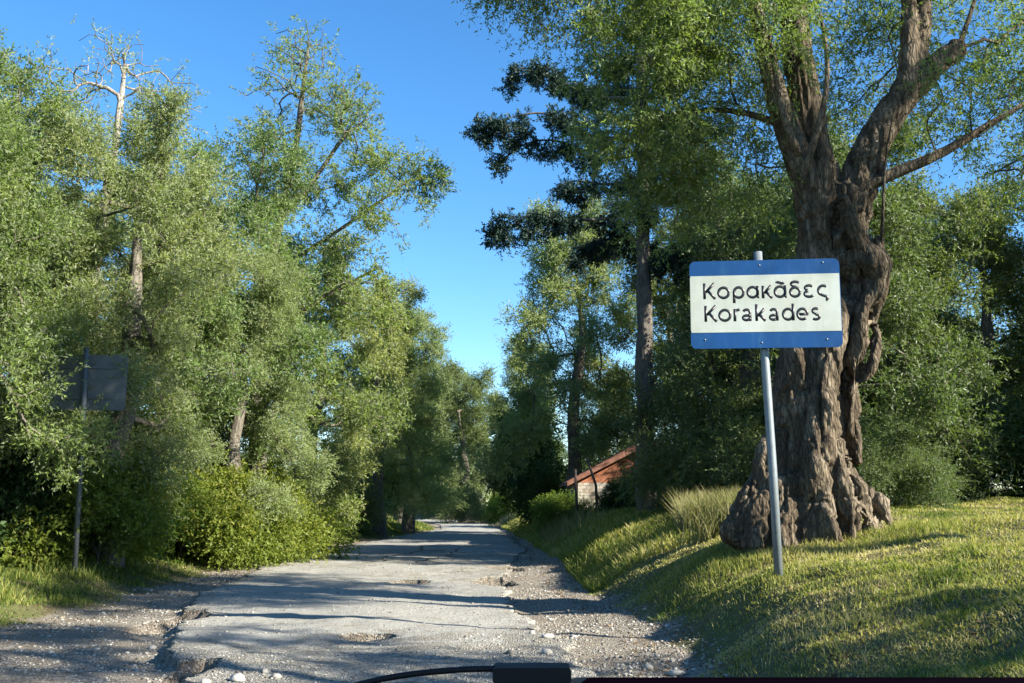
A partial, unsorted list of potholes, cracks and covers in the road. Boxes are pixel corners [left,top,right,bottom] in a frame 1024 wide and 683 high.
pothole [475,577,518,587]
pothole [162,659,220,683]
pothole [338,634,395,642]
crack [380,546,460,563]
pothole [124,610,211,635]
